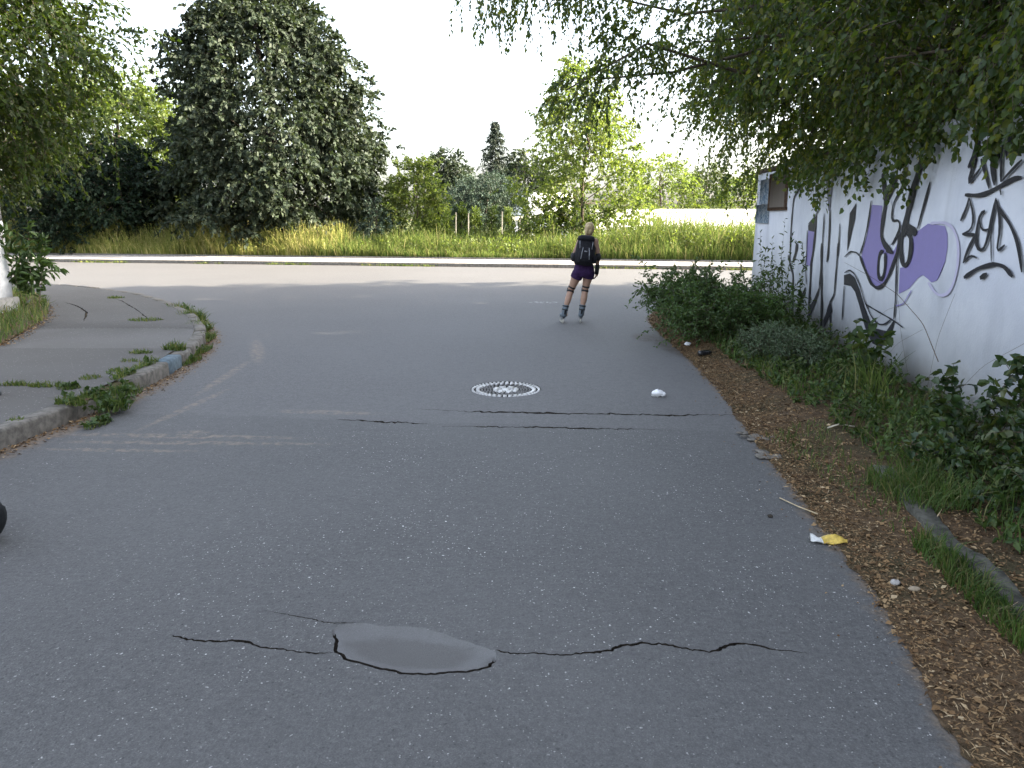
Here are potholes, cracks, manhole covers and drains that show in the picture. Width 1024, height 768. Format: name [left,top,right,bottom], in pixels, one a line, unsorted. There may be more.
crack [338,409,727,431]
crack [498,642,803,656]
pothole [332,623,496,675]
crack [173,611,354,654]
manhole cover [471,381,541,397]
